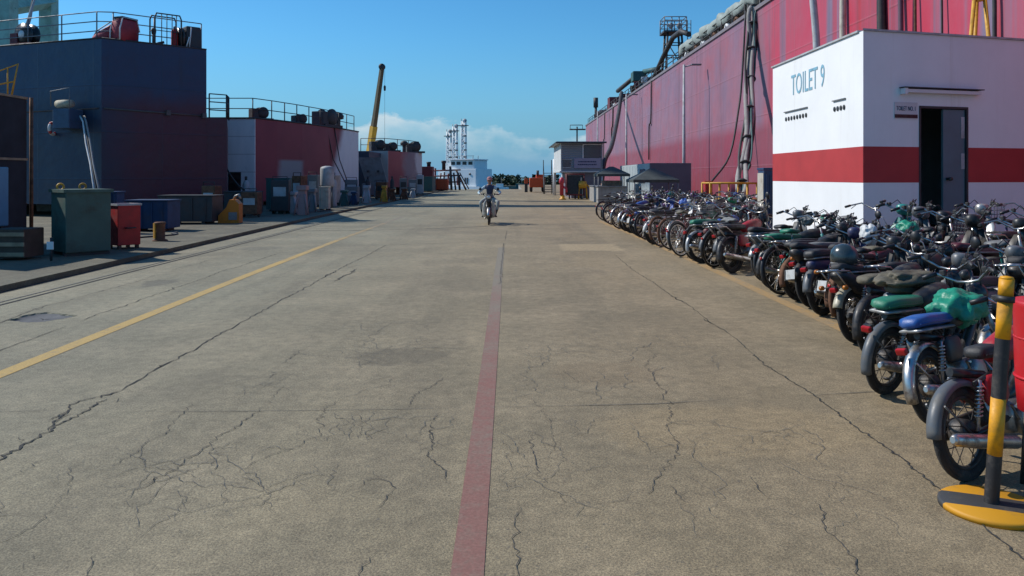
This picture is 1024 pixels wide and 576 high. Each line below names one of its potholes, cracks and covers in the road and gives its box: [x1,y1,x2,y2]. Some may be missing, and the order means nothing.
crack [512,328,899,575]
crack [0,319,463,541]
crack [0,247,382,480]
crack [616,255,1024,559]
